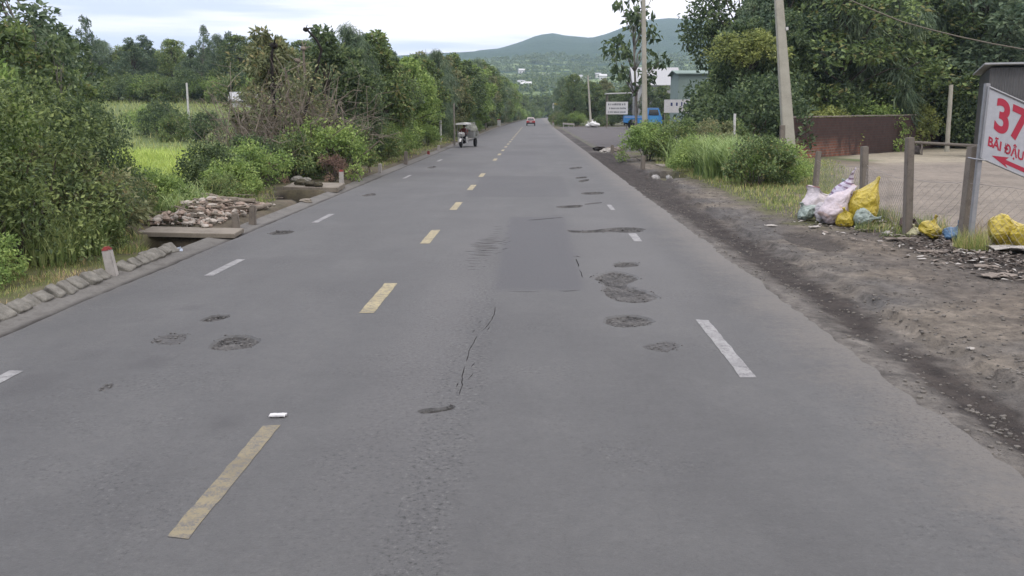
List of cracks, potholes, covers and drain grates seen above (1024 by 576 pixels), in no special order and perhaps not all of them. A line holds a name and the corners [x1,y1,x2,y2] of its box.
pothole [151,333,189,345]
pothole [603,315,656,327]
pothole [208,334,261,351]
pothole [417,404,456,414]
pothole [200,314,230,322]
pothole [589,271,661,303]
pothole [641,341,683,352]
